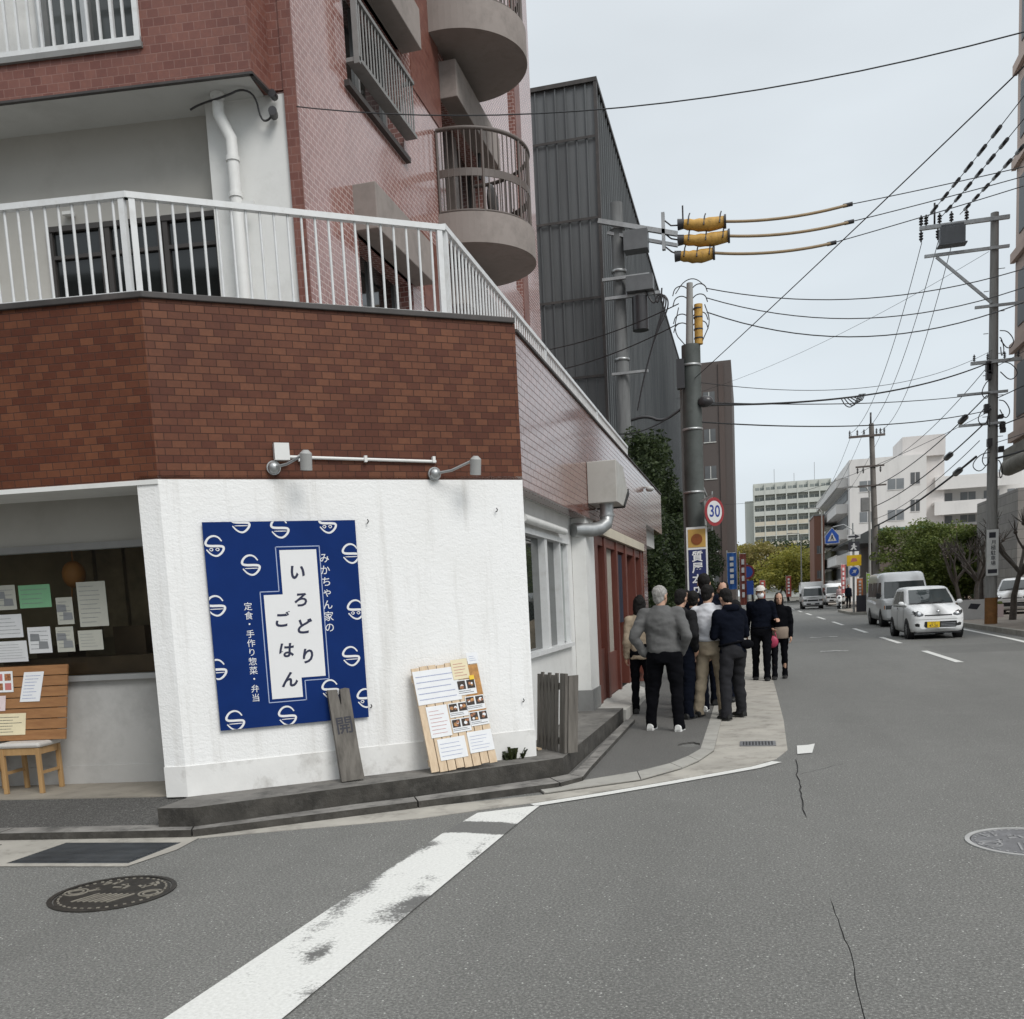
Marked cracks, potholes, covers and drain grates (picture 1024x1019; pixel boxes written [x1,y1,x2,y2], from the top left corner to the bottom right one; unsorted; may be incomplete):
manhole cover [46,875,177,913]
manhole cover [965,827,1024,856]
crack [831,901,865,1019]
crack [795,760,840,818]
